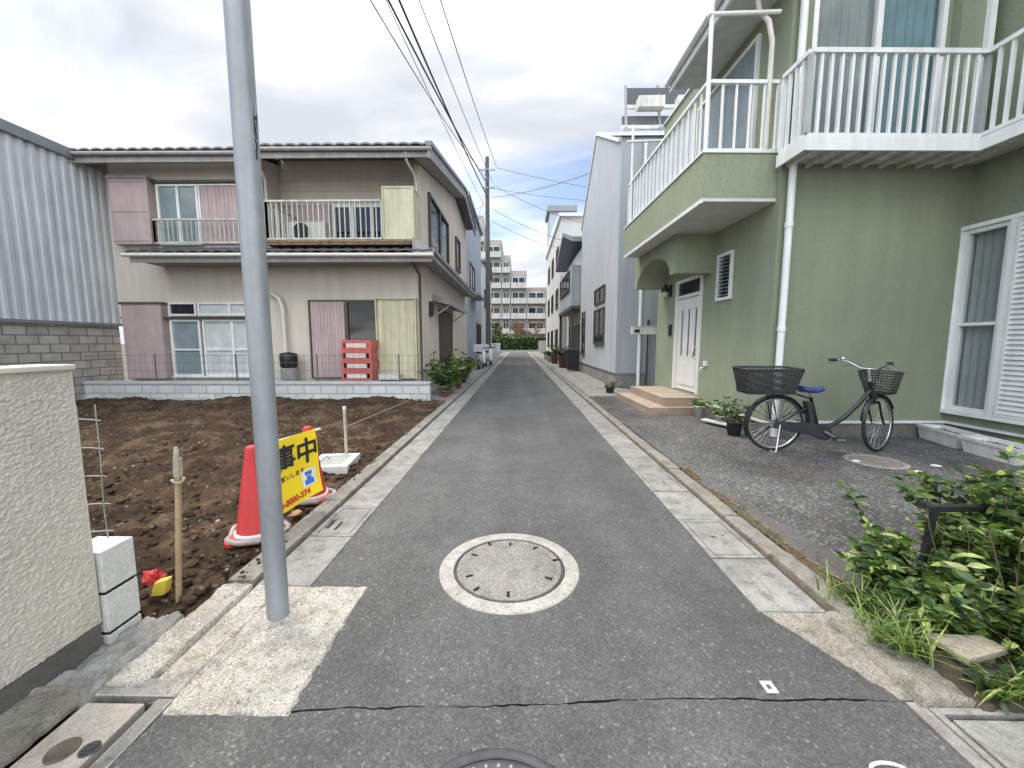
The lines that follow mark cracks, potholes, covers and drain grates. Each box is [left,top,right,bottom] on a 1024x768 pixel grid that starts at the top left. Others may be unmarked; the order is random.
manhole cover [439,533,580,615]
manhole cover [843,454,911,470]
crack [291,697,895,713]
manhole cover [439,748,555,768]
